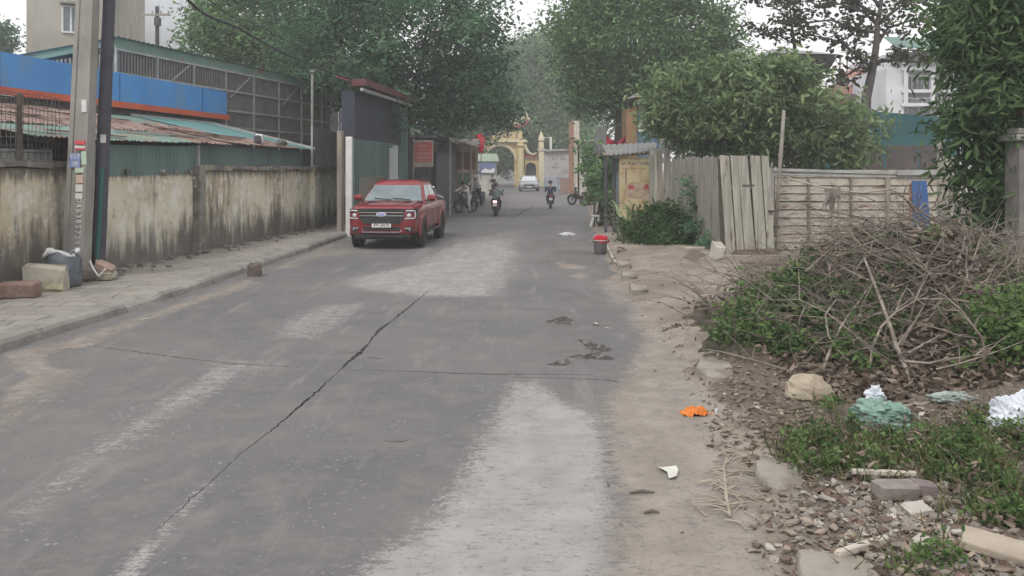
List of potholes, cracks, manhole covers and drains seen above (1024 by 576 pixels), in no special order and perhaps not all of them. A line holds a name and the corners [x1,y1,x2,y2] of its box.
crack [155,291,619,530]
pothole [545,316,577,325]
pothole [547,358,573,366]
pothole [570,339,617,360]
